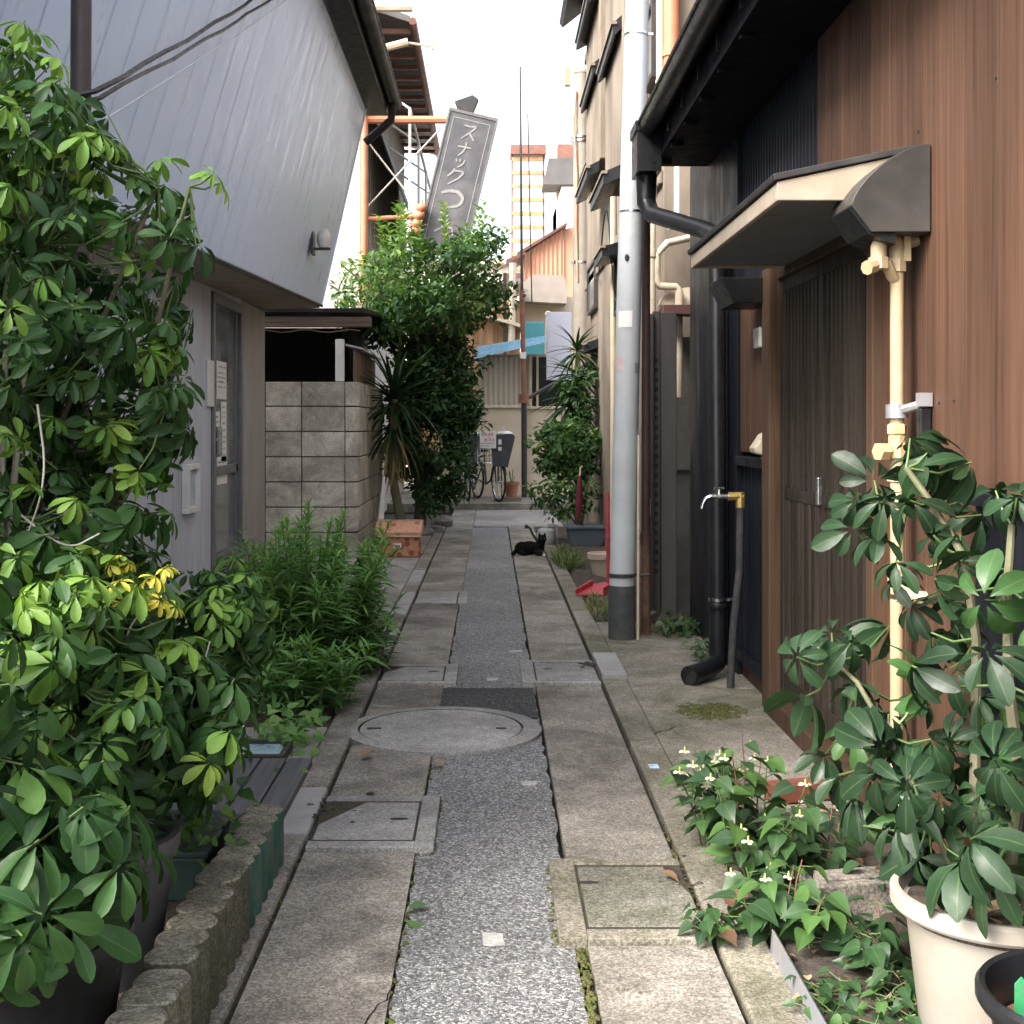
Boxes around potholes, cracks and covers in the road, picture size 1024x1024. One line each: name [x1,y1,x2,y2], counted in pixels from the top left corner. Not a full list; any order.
manhole cover [350,706,543,764]
manhole cover [378,664,459,688]
manhole cover [549,855,712,965]
manhole cover [305,792,441,854]
manhole cover [519,659,601,696]
